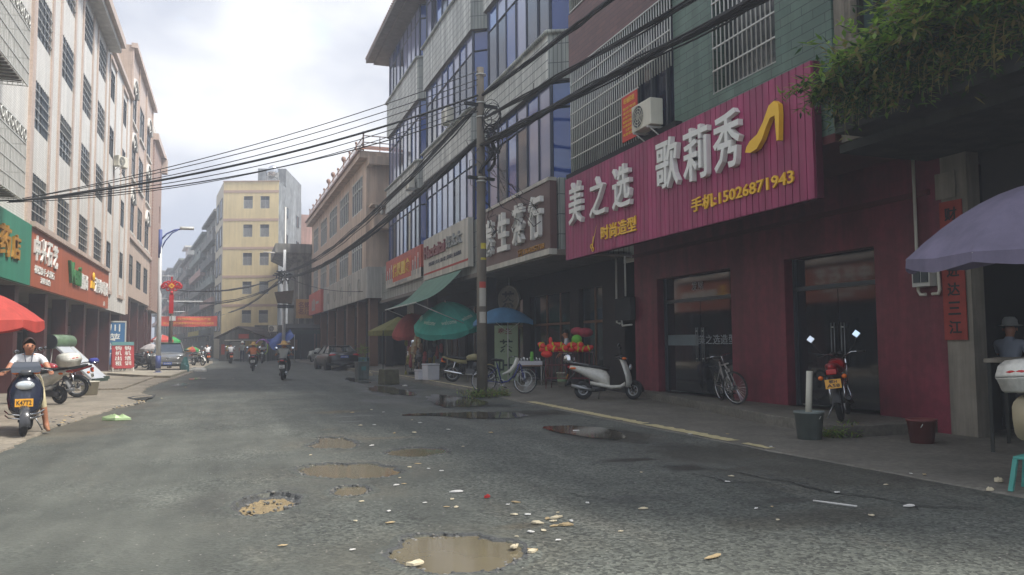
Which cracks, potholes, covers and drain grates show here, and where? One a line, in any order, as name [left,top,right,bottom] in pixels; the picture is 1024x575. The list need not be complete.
pothole [369,531,542,575]
crack [694,469,982,510]
pothole [322,484,380,498]
pothole [287,461,412,480]
pothole [378,446,459,459]
pothole [301,436,365,450]
pothole [220,490,310,519]
